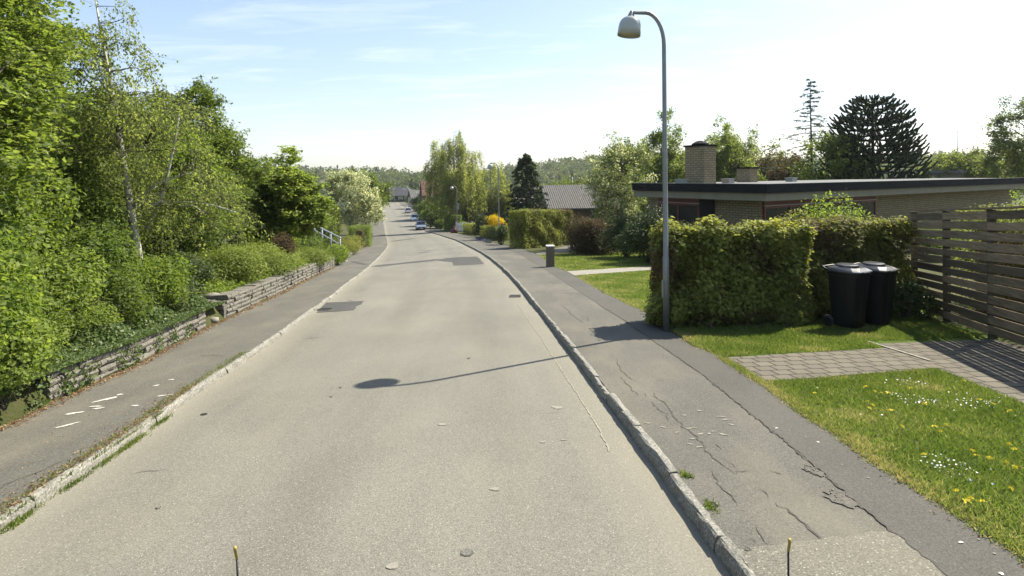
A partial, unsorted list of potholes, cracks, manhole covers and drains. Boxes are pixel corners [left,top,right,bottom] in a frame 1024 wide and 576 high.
crack [762,490,822,539]
crack [617,361,781,474]
